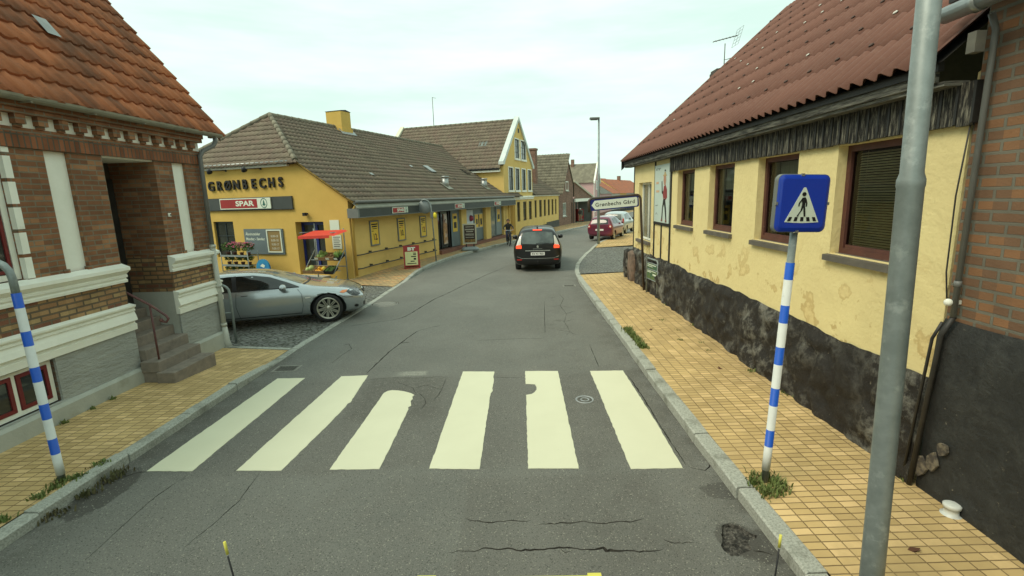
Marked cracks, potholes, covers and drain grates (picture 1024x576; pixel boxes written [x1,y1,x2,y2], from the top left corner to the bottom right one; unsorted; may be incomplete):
crack [449,540,693,553]
pothole [721,523,757,556]
